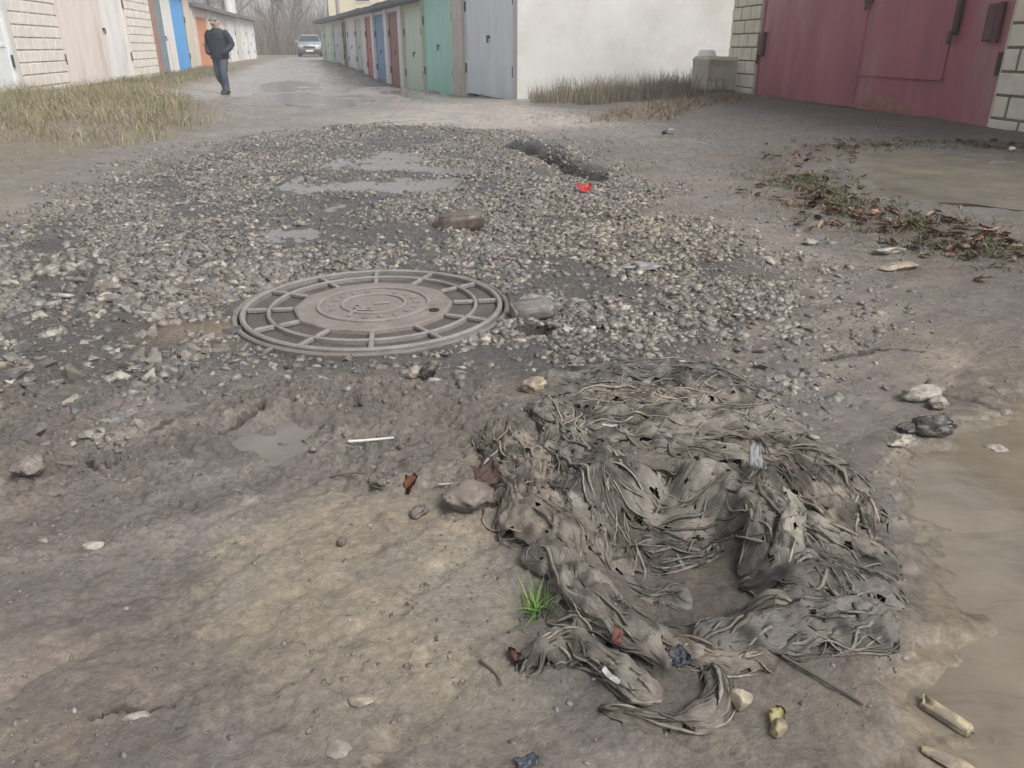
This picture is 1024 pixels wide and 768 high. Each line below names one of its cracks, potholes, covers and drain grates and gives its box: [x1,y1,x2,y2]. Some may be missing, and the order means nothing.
pothole [503,144,607,182]
manhole cover [231,269,509,359]
